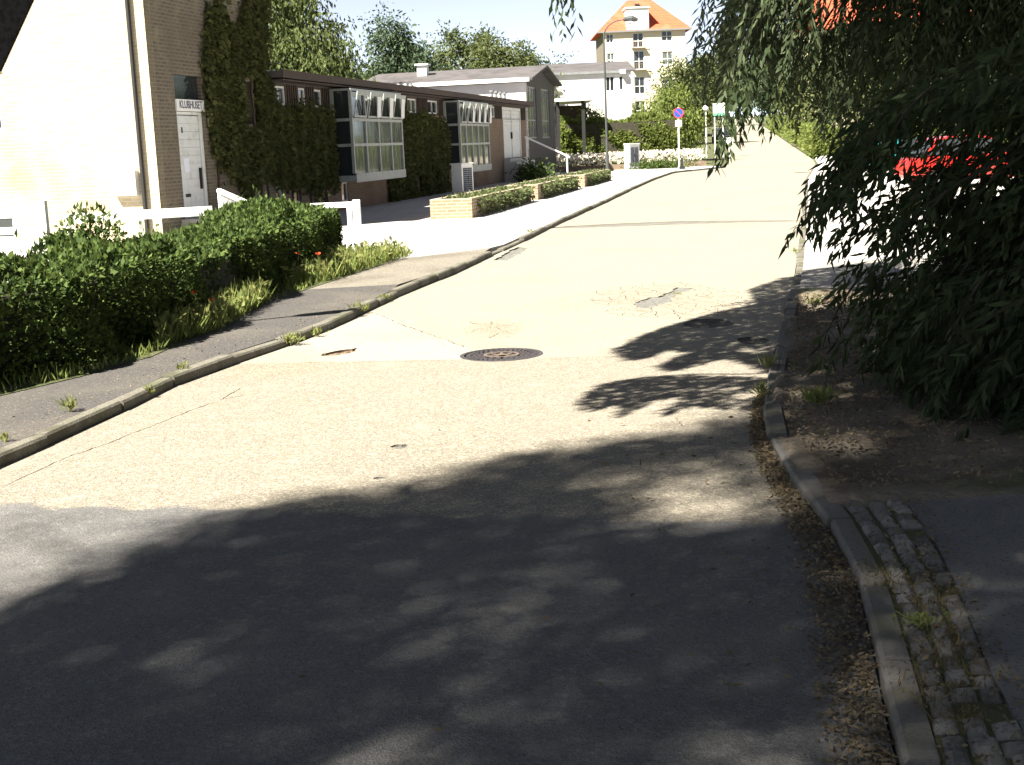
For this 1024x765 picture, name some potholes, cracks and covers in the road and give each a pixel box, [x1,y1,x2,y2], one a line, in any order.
pothole [683,319,734,328]
crack [3,386,250,488]
manhole cover [460,348,543,362]
pothole [321,348,357,356]
crack [590,282,752,319]
